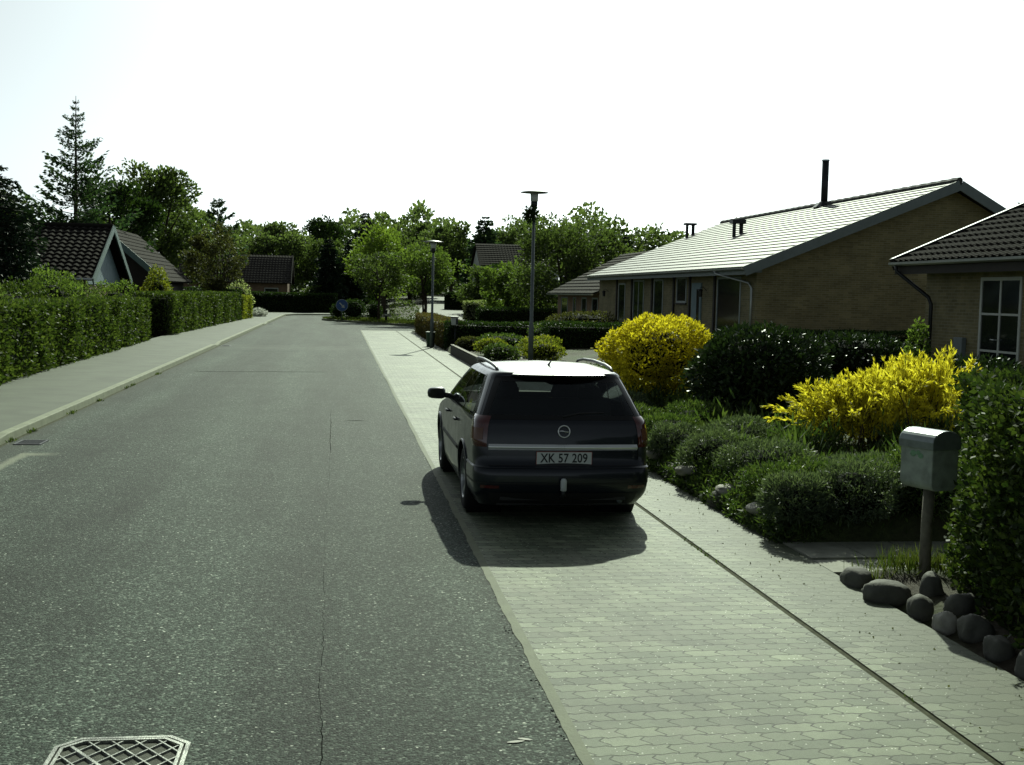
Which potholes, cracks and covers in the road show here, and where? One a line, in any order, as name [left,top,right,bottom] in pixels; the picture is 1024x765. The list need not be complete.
crack [318,413,331,765]
